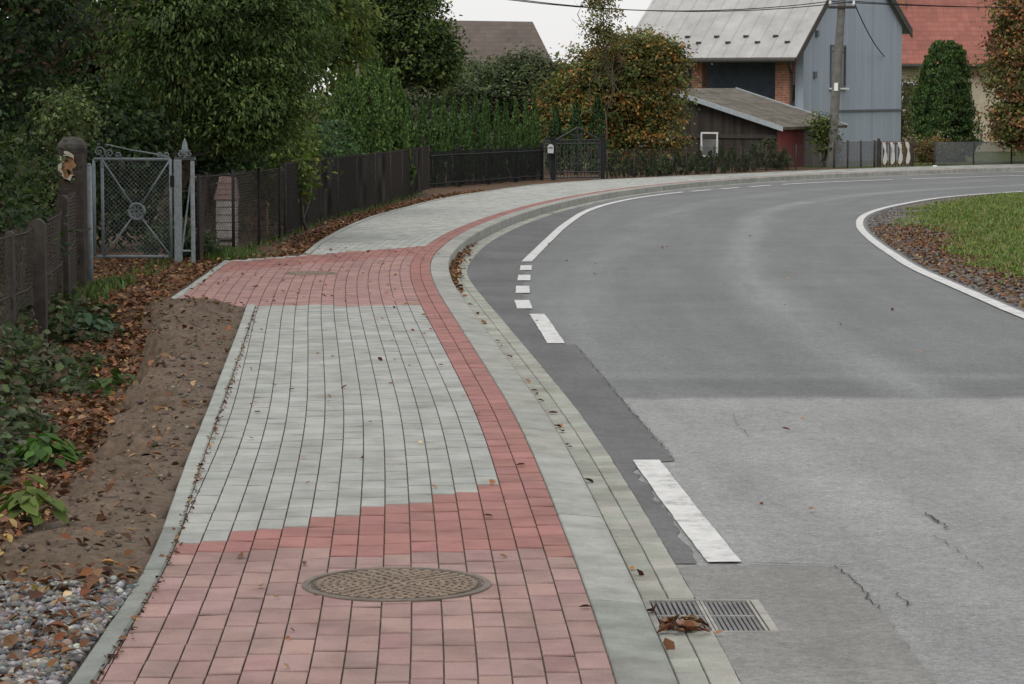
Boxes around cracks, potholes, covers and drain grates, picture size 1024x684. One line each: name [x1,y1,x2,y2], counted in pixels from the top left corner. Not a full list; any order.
drain grate [642,599,780,683]
crack [925,511,985,569]
manhole cover [302,567,491,605]
